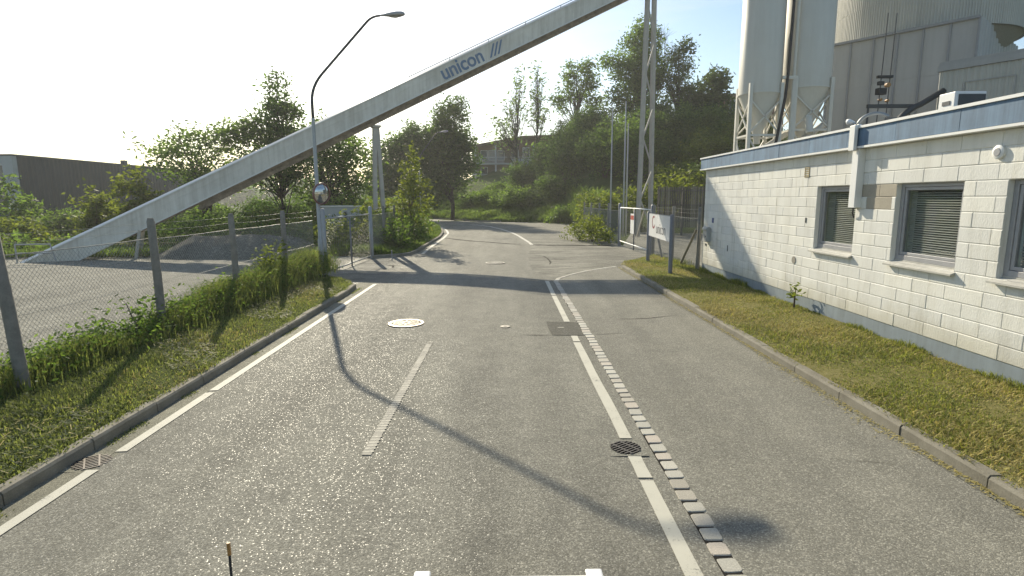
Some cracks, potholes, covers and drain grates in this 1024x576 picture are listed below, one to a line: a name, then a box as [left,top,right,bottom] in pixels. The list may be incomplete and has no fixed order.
drain grate [604,439,649,456]
drain grate [58,452,121,473]
manhole cover [388,319,424,328]
